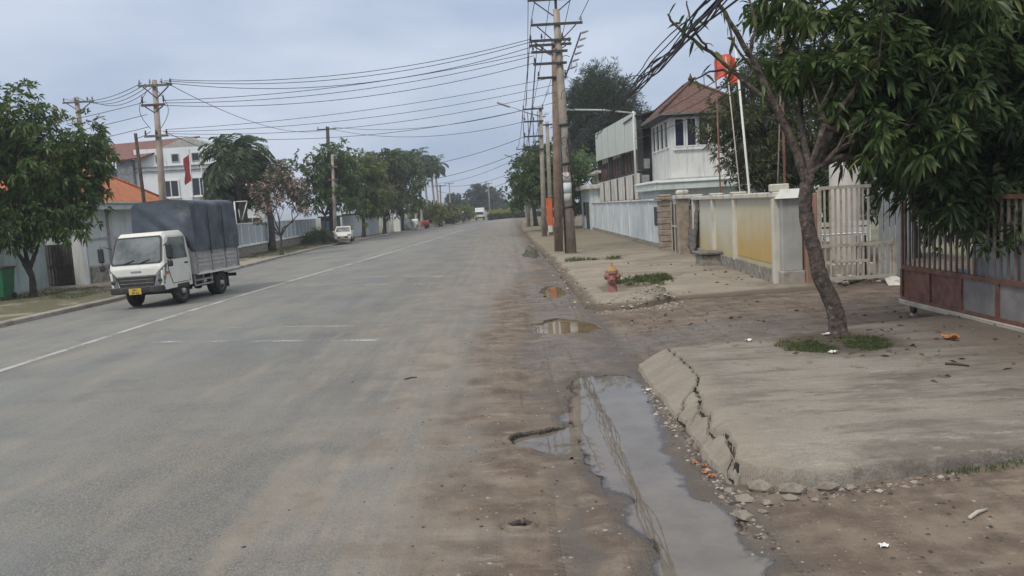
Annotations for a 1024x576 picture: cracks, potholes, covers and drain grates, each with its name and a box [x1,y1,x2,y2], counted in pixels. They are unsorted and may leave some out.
pothole [527,317,607,336]
pothole [537,286,569,299]
pothole [501,519,537,532]
pothole [502,425,586,460]
